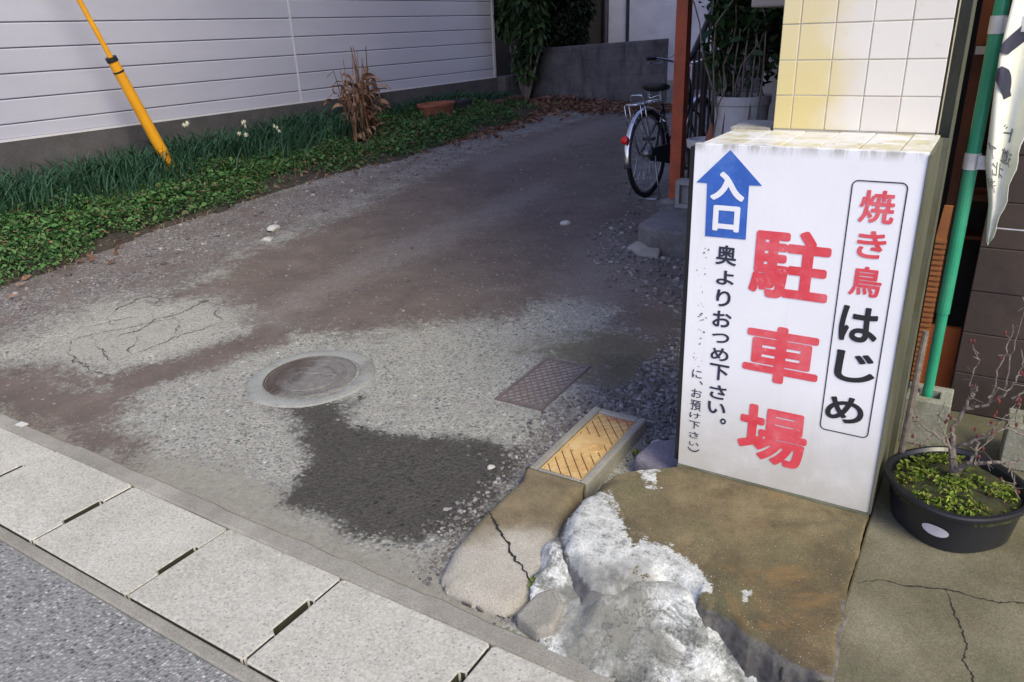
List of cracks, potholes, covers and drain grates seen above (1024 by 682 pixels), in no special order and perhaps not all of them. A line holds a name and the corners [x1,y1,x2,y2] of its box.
utility cover [495,357,590,411]
manhole cover [246,350,376,408]
crack [32,285,222,394]
crack [489,512,532,585]
crack [858,579,1024,682]
